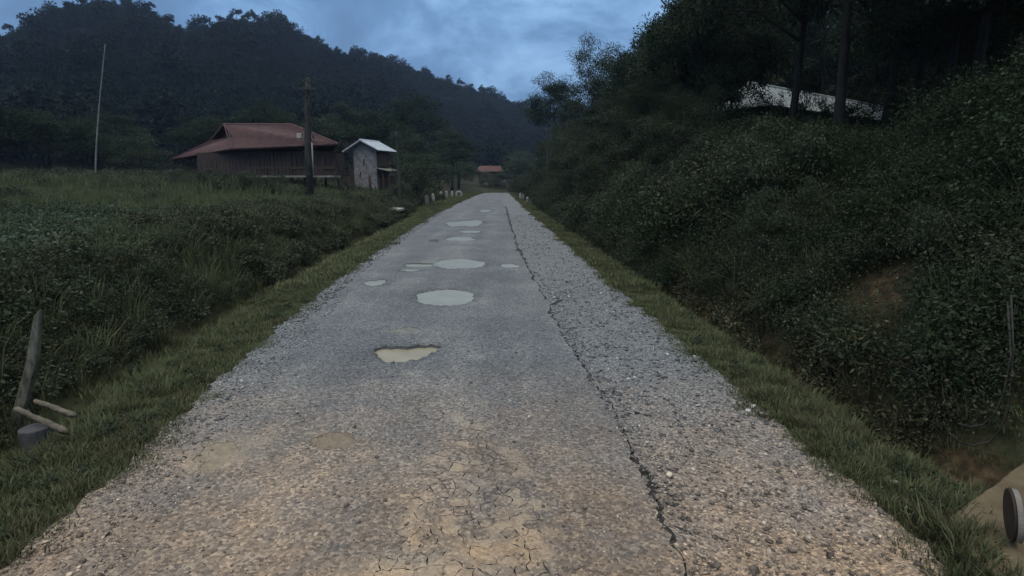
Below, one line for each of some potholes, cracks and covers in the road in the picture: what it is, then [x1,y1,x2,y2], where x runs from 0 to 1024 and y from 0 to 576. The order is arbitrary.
pothole [374,344,441,363]
pothole [433,259,485,269]
crack [506,207,693,576]
pothole [416,289,474,306]
crack [375,403,559,576]
